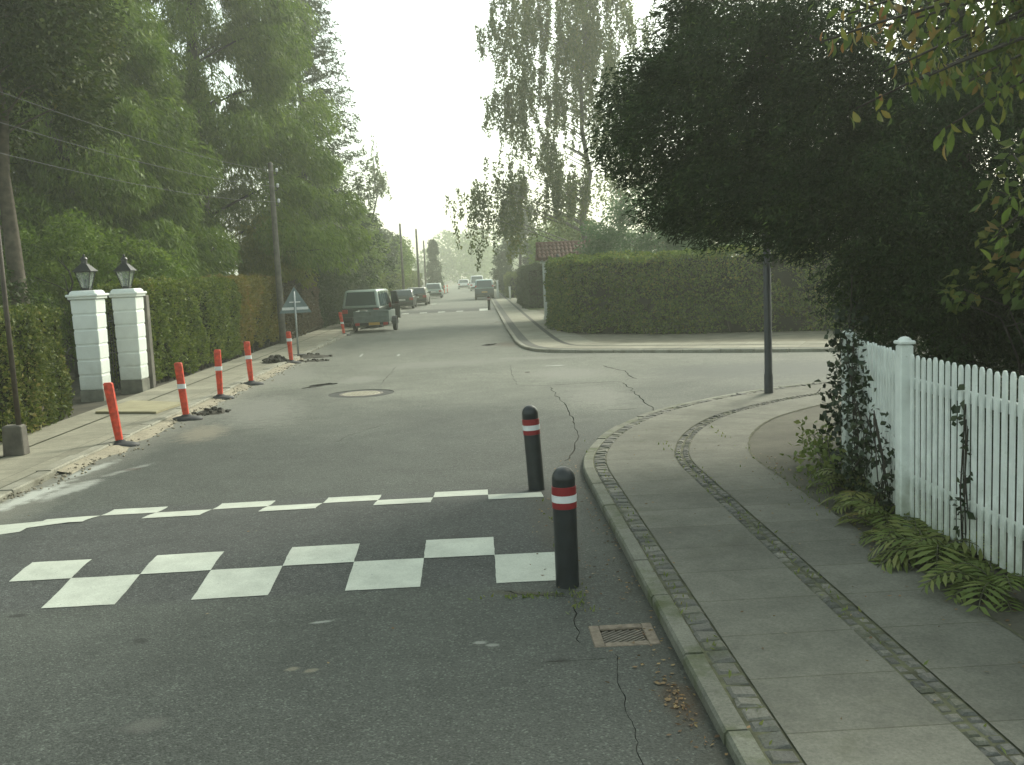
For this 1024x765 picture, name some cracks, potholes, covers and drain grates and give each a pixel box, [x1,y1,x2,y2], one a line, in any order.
manhole cover [328,389,394,398]
crack [550,387,579,461]
crack [509,591,580,642]
drain grate [588,623,661,648]
crack [547,654,644,765]
